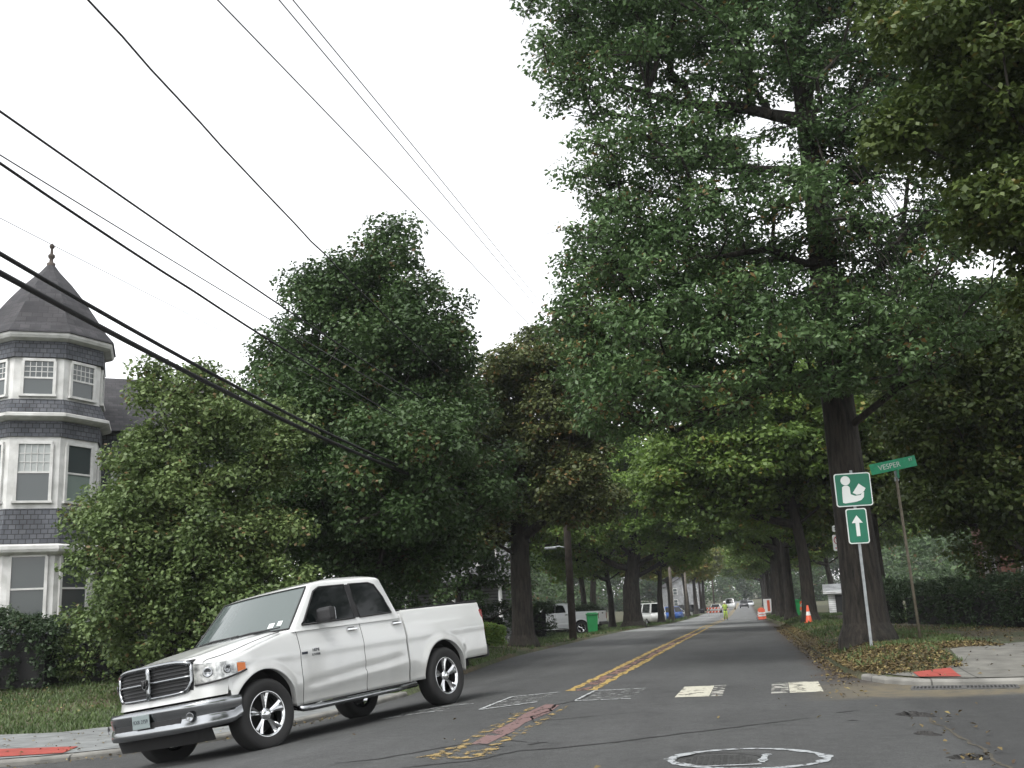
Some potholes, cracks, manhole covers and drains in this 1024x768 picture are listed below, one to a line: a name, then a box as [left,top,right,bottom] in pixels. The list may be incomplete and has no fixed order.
manhole cover [673,752,763,766]
